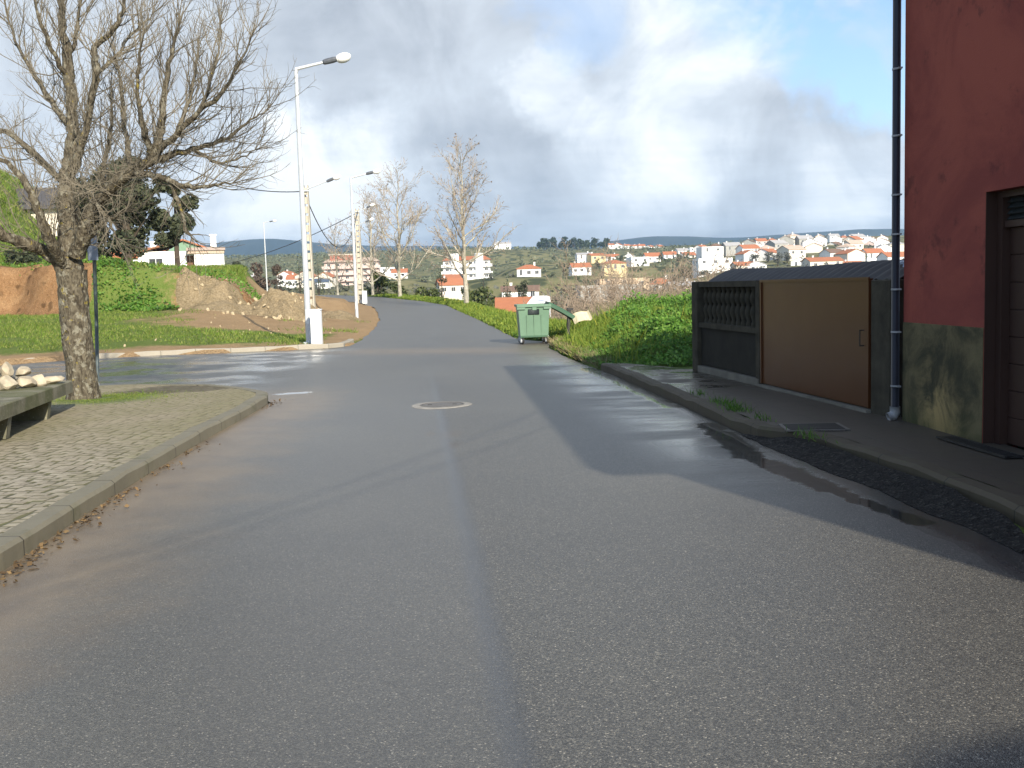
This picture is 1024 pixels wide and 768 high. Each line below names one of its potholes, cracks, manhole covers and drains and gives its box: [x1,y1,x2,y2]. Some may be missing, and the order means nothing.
drain grate [936,435,1024,459]
manhole cover [412,401,472,409]
